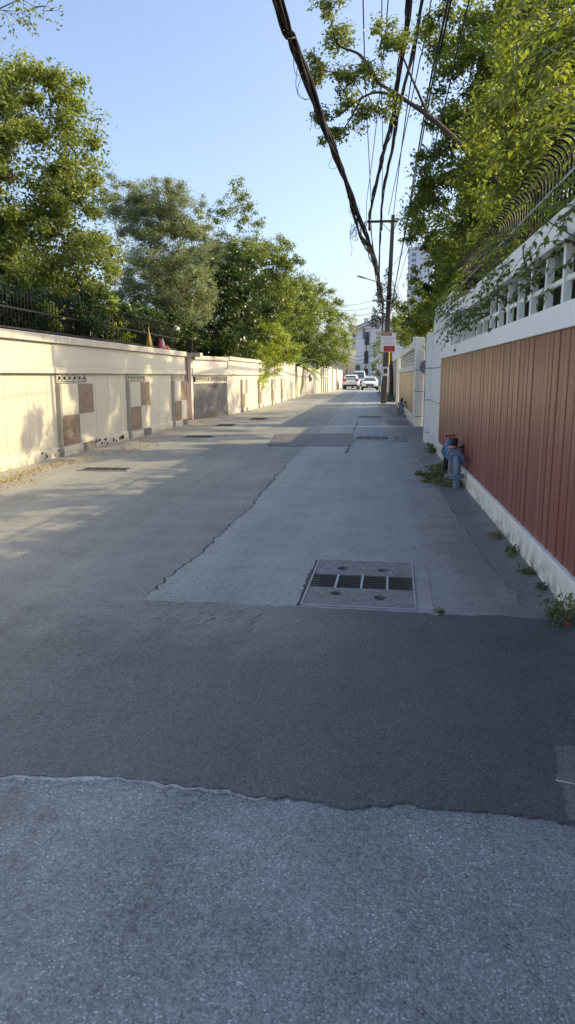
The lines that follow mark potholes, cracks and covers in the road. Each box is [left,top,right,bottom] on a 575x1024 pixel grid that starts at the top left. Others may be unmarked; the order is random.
crack [148,466,286,594]
